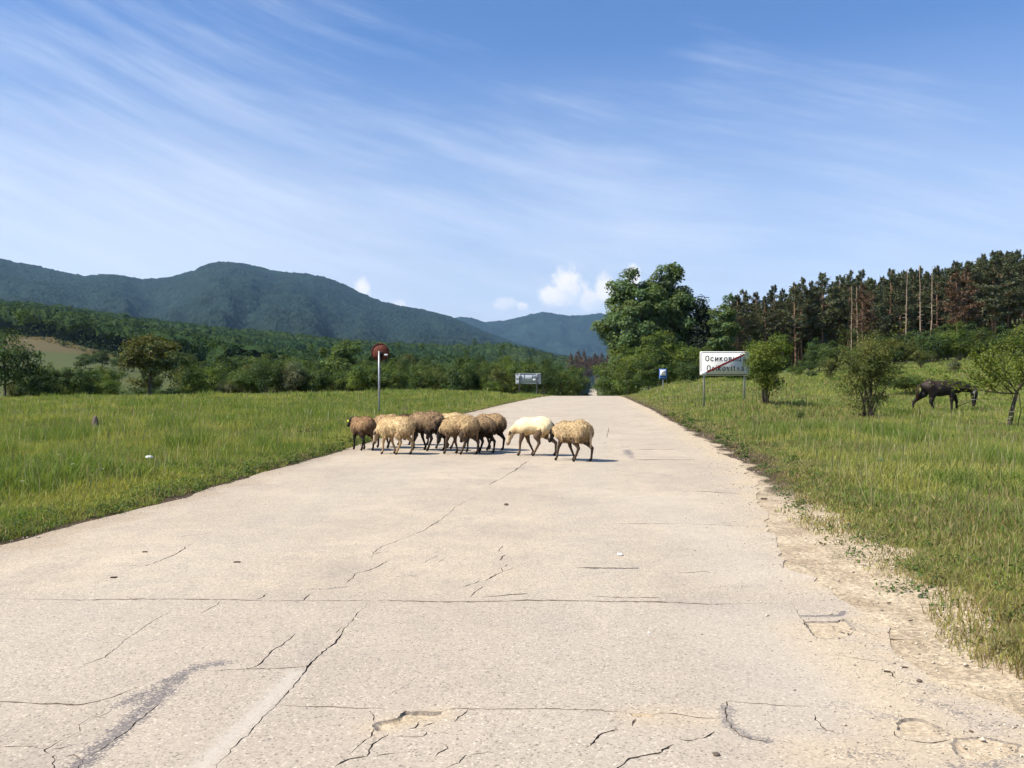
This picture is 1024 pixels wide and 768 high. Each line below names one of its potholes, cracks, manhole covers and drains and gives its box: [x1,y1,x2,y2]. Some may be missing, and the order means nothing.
crack [38,546,835,768]
pothole [896,718,952,737]
pothole [950,737,1022,761]
pothole [372,711,443,732]
pothole [804,619,856,639]
crack [347,501,467,582]
